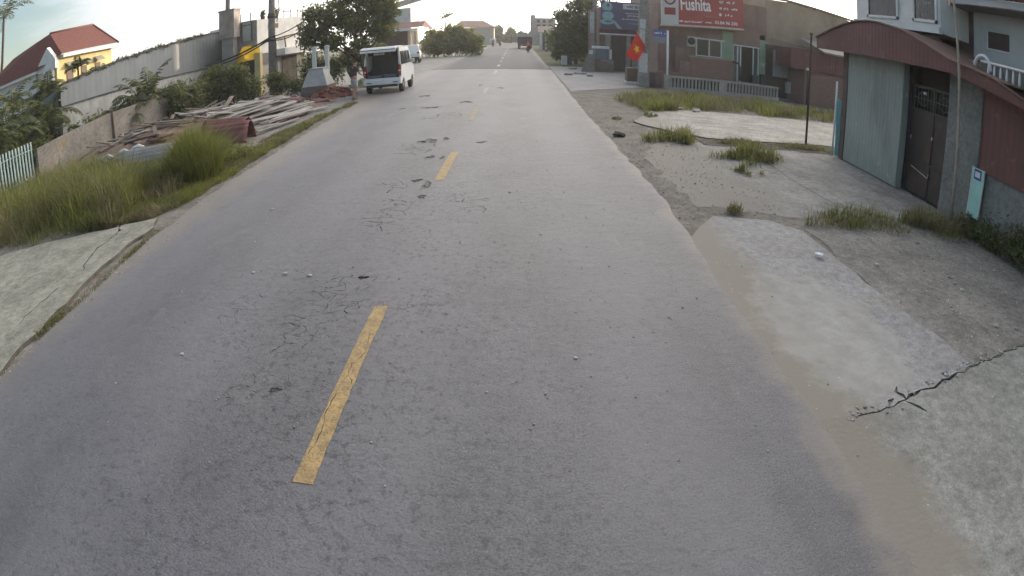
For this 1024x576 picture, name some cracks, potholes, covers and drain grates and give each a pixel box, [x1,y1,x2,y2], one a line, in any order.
crack [353,181,415,231]
crack [308,335,370,454]
crack [271,272,375,353]
crack [83,223,121,269]
crack [220,373,291,411]
crack [858,344,1024,416]
